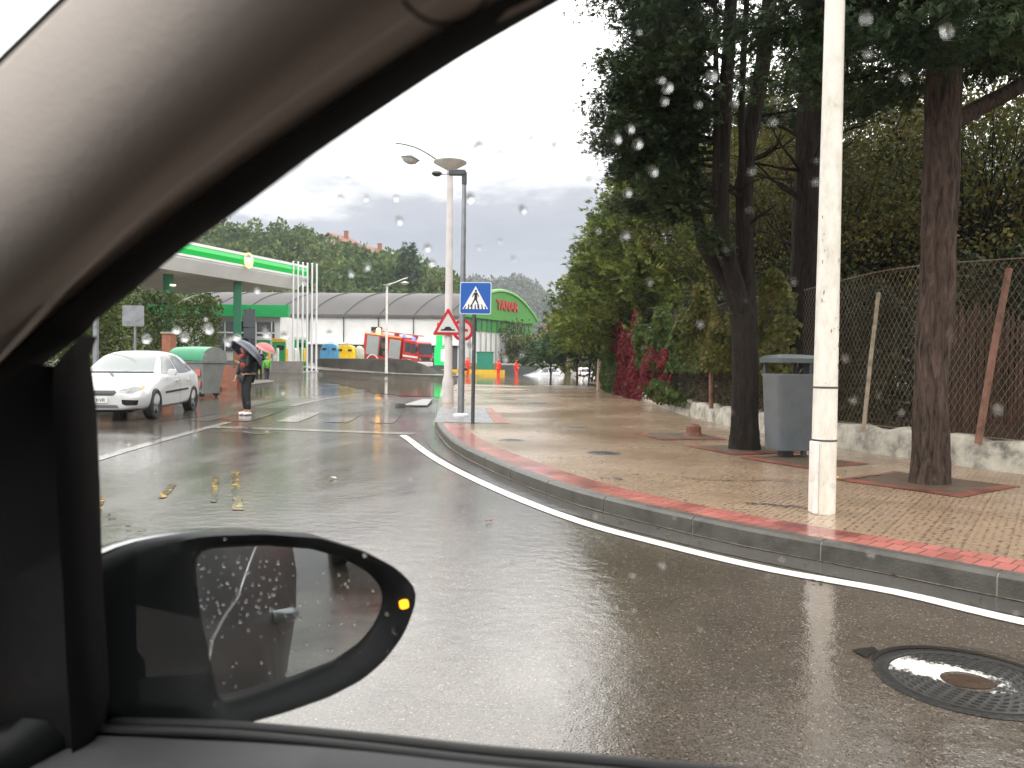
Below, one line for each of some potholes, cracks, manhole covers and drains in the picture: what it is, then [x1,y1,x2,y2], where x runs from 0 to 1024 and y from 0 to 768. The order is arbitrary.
manhole cover [852,645,1024,721]
